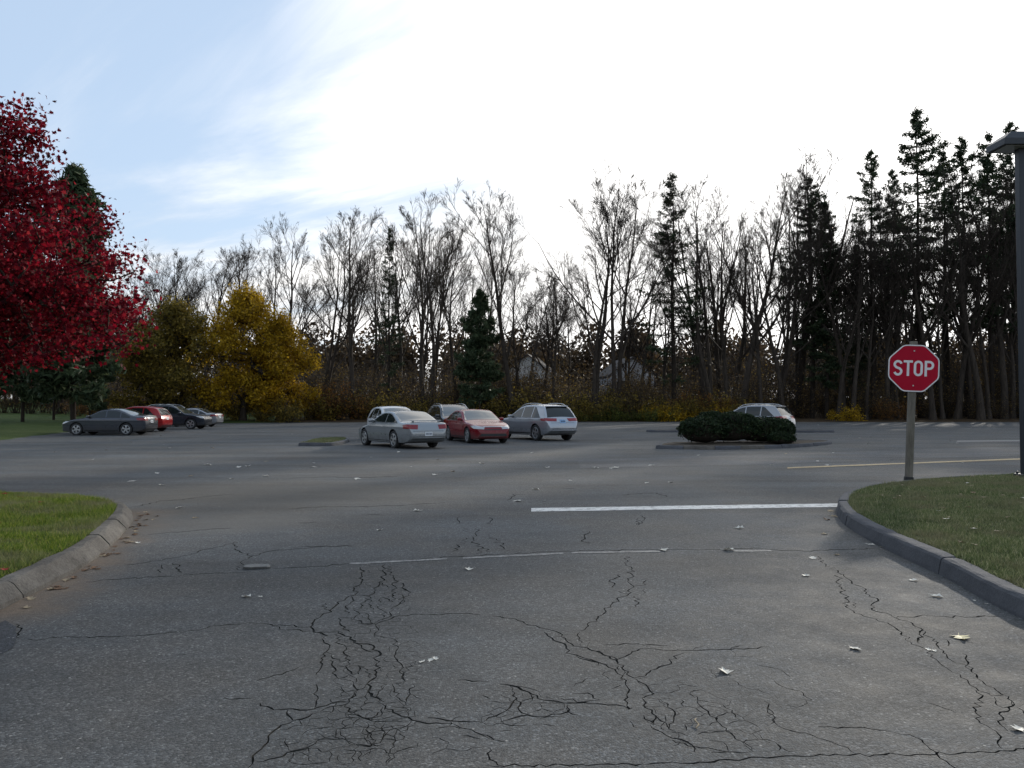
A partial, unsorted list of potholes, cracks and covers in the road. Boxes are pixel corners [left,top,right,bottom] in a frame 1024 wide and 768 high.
crack [131,528,349,569]
crack [818,556,1024,749]
crack [818,726,955,768]
crack [29,556,856,768]
crack [296,502,508,554]
